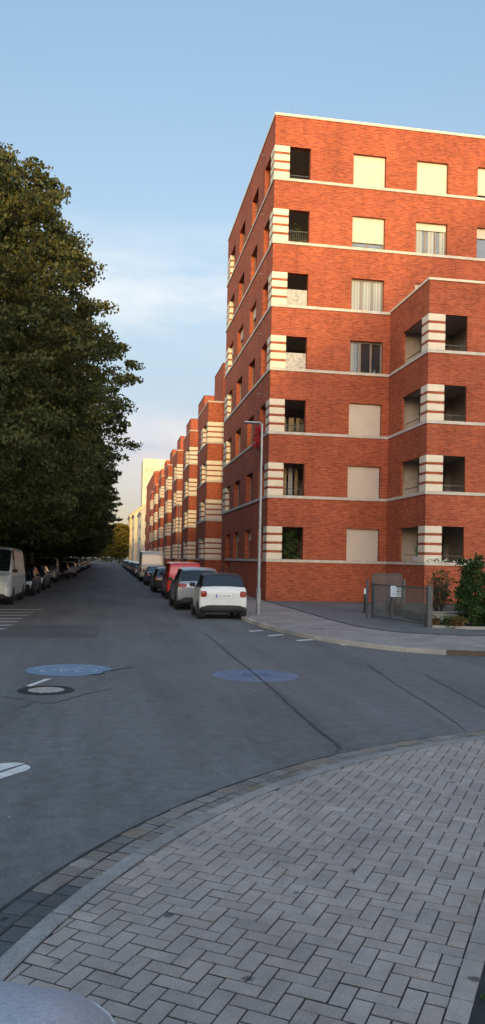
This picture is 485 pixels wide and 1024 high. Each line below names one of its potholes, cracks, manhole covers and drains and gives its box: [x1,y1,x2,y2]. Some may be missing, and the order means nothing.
manhole cover [17,685,75,695]
